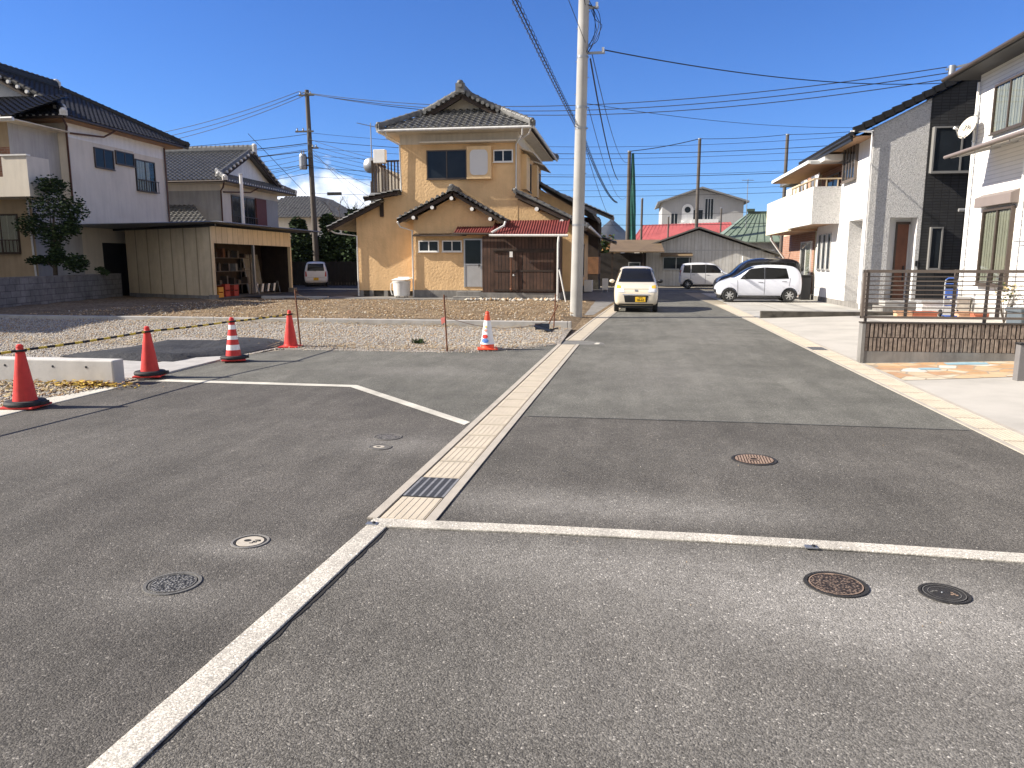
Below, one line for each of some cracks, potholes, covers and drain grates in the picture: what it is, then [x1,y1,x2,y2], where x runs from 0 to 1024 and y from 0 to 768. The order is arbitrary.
manhole cover [917,583,972,605]
manhole cover [731,454,778,466]
manhole cover [142,571,202,596]
manhole cover [230,534,270,549]
manhole cover [803,571,870,598]
